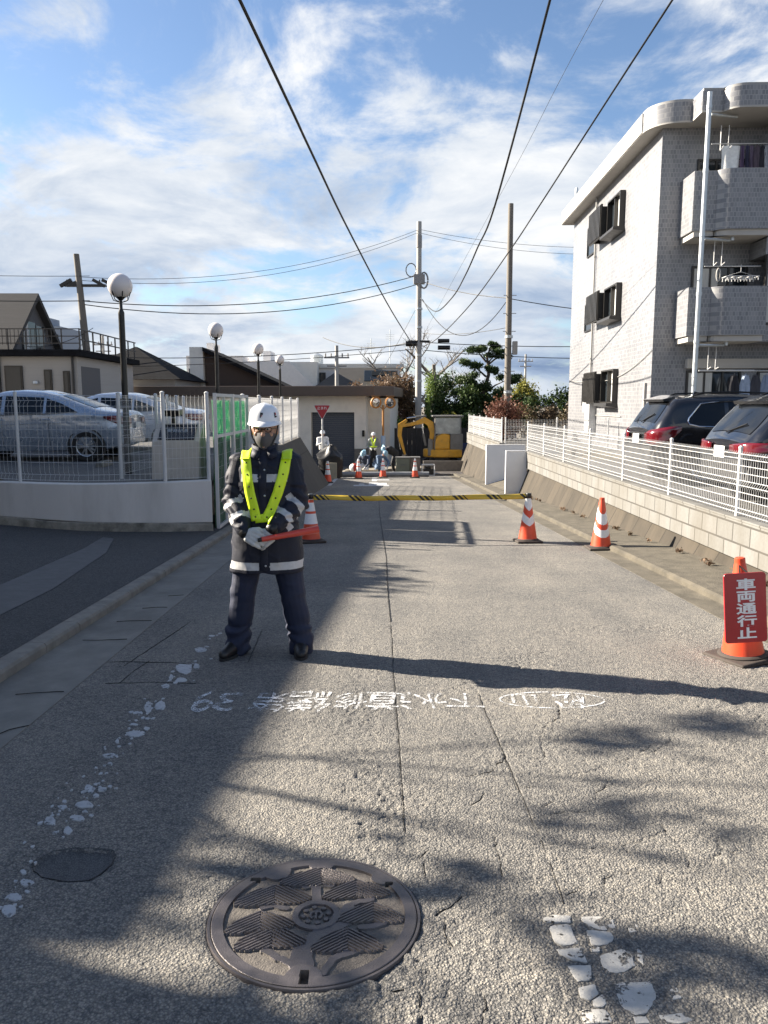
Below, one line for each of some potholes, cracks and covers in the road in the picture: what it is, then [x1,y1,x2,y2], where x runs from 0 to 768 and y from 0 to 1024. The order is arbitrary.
crack [419,706,742,896]
manhole cover [206,858,421,994]
